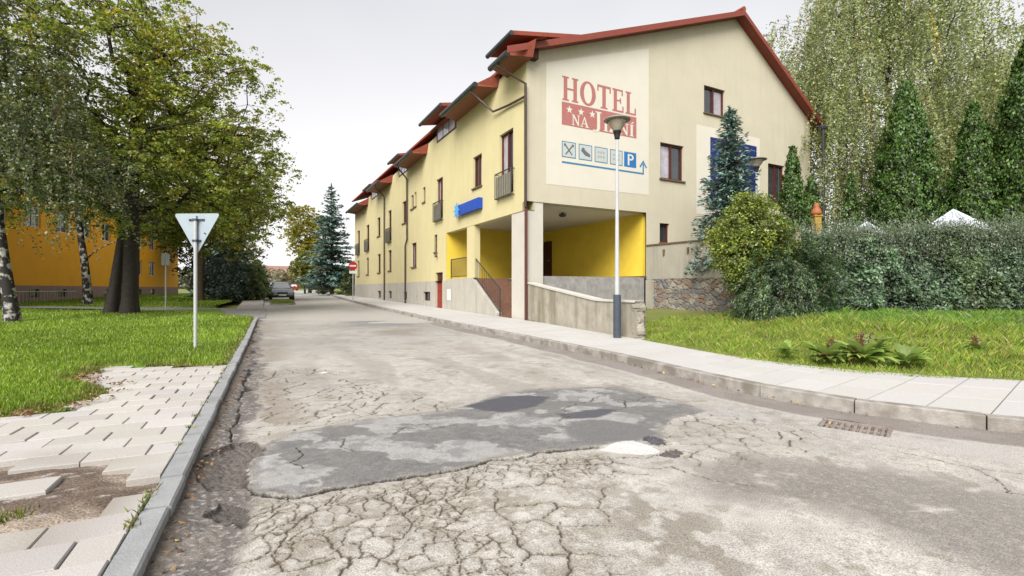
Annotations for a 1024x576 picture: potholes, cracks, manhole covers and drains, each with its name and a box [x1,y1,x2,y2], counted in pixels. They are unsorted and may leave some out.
crack [896,451,1024,495]
pothole [642,435,667,446]
drain grate [818,418,893,437]
pothole [192,441,268,492]
crack [225,322,823,576]
pothole [201,503,252,529]
pothole [655,449,684,459]
